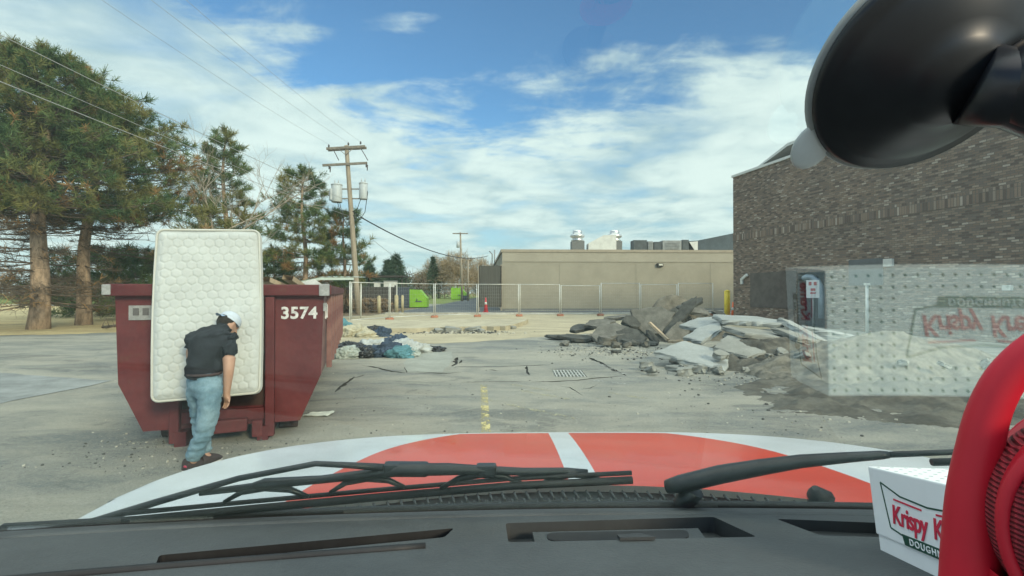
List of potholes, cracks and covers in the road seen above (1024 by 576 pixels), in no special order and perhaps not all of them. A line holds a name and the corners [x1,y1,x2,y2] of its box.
crack [335,366,407,392]
crack [562,357,626,392]
